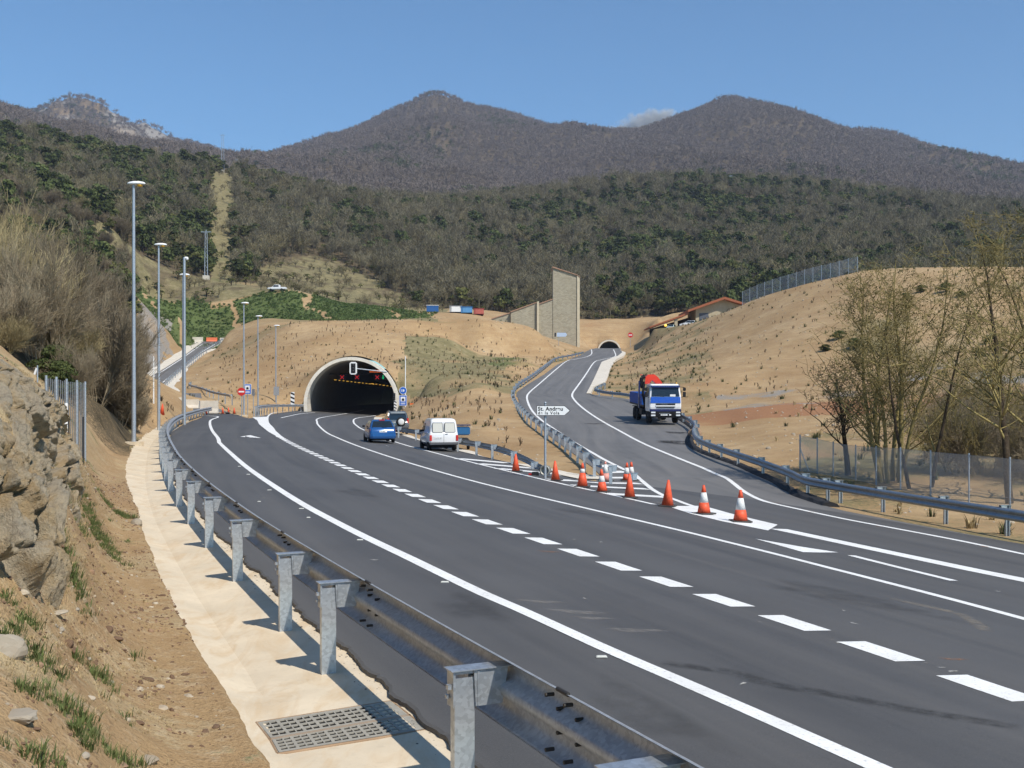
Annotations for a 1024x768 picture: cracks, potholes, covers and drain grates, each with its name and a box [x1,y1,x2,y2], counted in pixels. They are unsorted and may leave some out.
drain grate [268,714,426,754]
drain grate [255,700,410,740]
